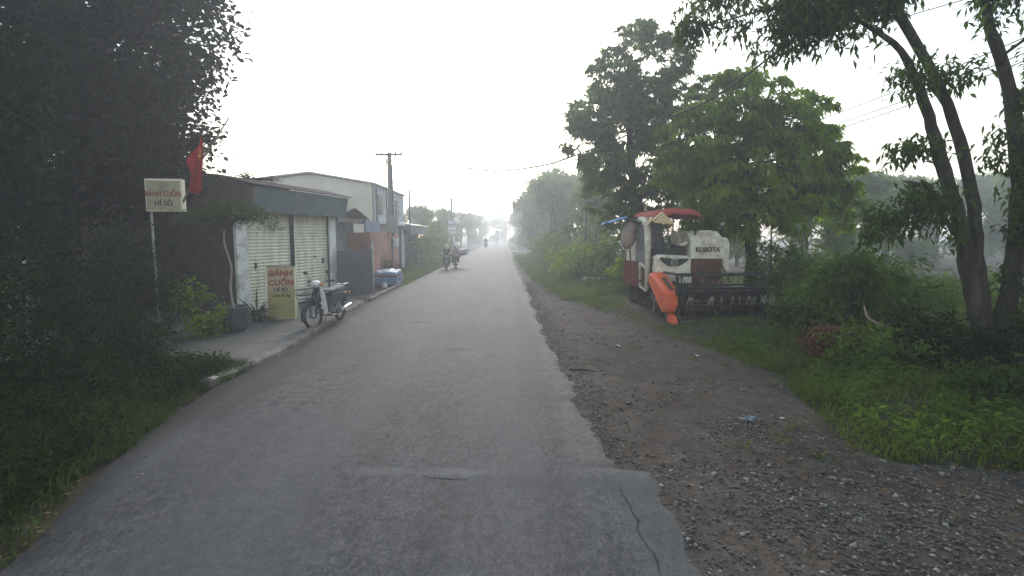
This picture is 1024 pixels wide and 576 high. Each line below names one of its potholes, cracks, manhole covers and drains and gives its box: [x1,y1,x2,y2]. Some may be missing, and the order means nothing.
crack [621,486,661,575]
